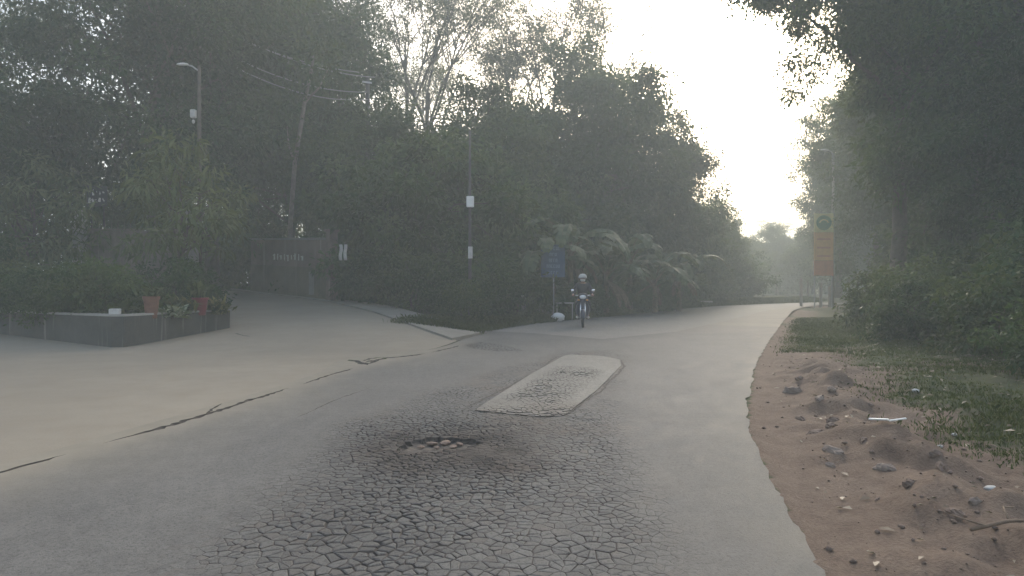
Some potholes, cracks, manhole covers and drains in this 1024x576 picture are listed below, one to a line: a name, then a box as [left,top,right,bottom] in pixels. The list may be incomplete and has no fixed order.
crack [138,350,703,576]
crack [109,388,287,442]
pothole [396,437,481,455]
crack [0,455,62,473]
